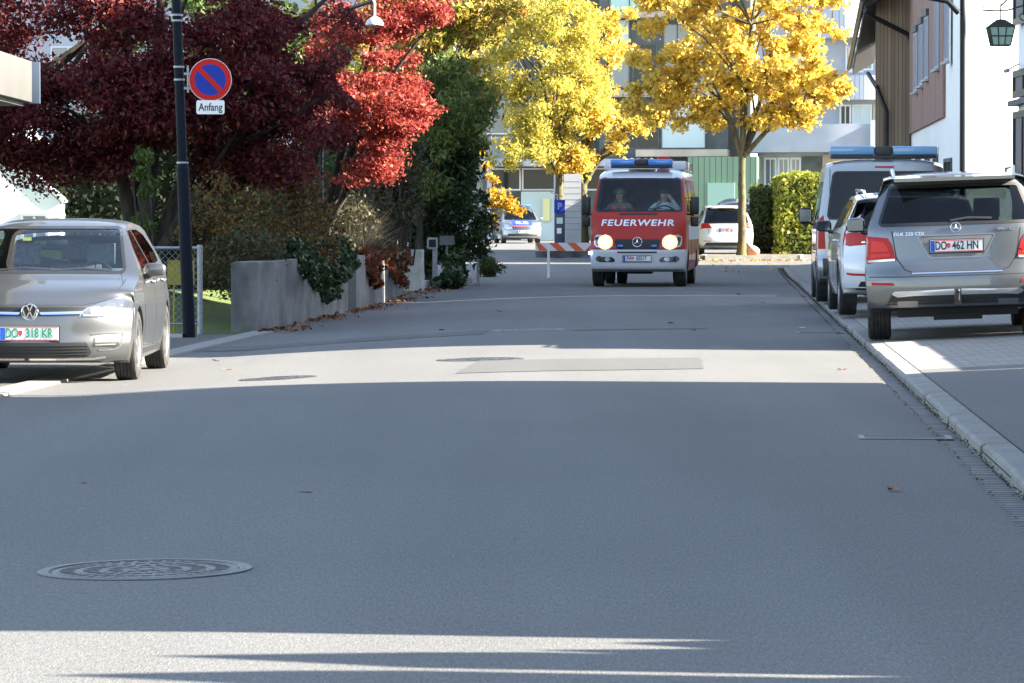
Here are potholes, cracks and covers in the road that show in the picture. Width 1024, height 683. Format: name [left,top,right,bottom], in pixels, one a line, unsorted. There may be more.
manhole cover [37,558,252,581]
